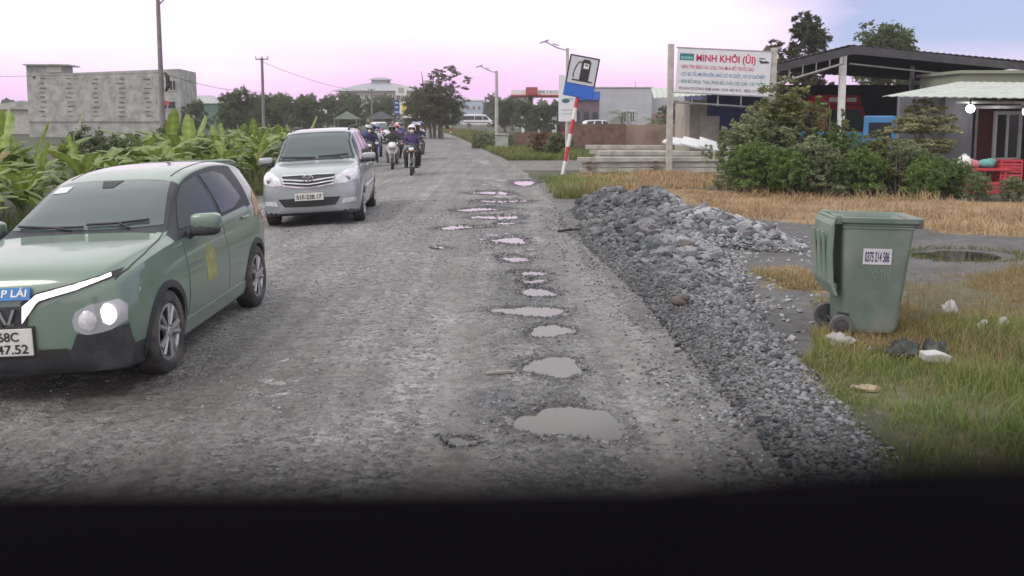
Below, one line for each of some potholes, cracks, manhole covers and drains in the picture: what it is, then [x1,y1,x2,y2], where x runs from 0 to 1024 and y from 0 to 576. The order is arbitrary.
pothole [487,251,543,264]
pothole [520,320,579,345]
pothole [435,433,491,450]
pothole [459,302,587,321]
pothole [504,282,569,298]
pothole [500,350,598,385]
pothole [474,392,658,451]
pothole [508,178,542,188]
pothole [482,233,537,246]
pothole [453,213,531,222]
pothole [514,275,556,285]
pothole [500,267,560,277]
